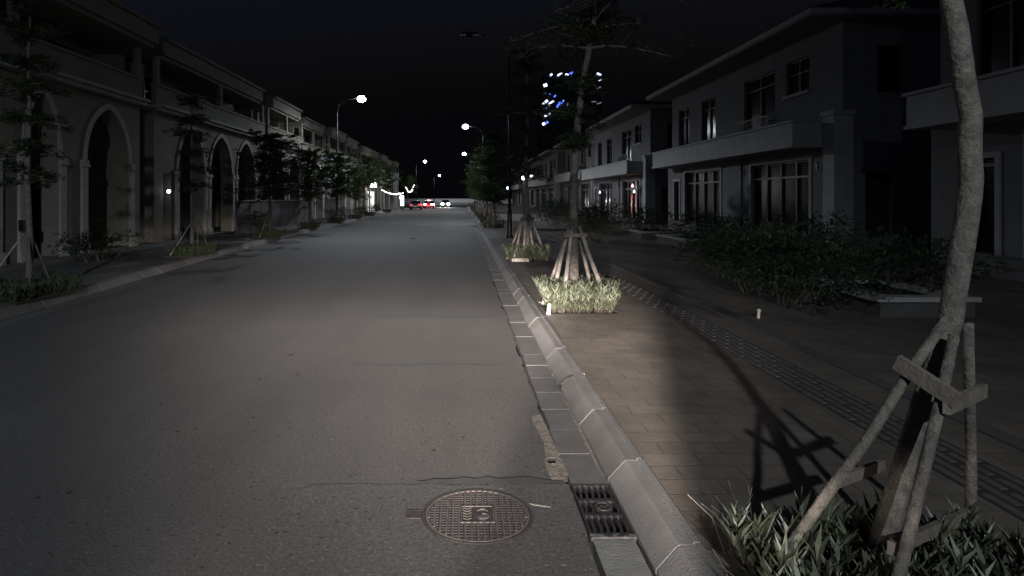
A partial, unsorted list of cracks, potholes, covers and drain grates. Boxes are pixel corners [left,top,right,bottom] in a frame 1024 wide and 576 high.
drain grate [571,484,635,538]
manhole cover [406,489,533,545]
